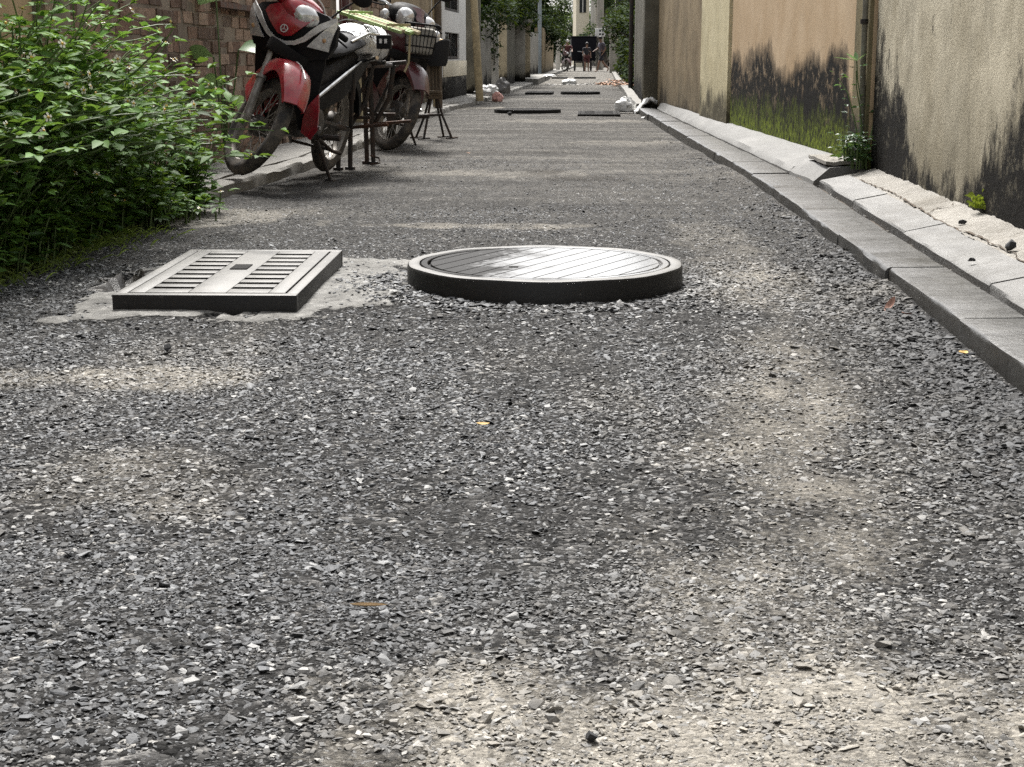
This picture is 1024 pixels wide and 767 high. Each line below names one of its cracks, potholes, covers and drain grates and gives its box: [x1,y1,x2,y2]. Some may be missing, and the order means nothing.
manhole cover [407,245,683,304]
drain grate [112,249,343,315]
